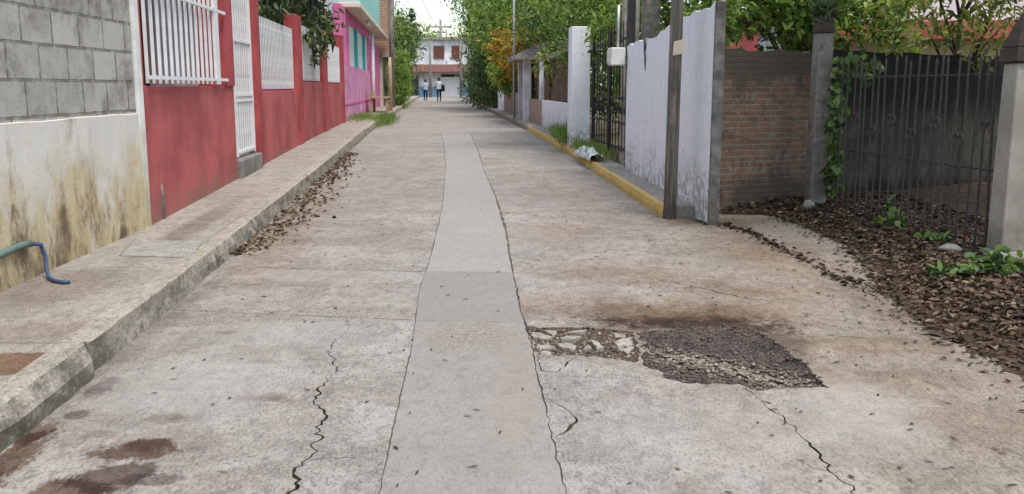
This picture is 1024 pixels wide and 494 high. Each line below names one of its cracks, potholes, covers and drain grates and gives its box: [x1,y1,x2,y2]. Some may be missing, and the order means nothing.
pothole [636,324,829,392]
crack [286,319,355,494]
utility cover [119,240,203,257]
crack [690,220,876,297]
crack [555,403,578,438]
crack [745,388,855,494]
